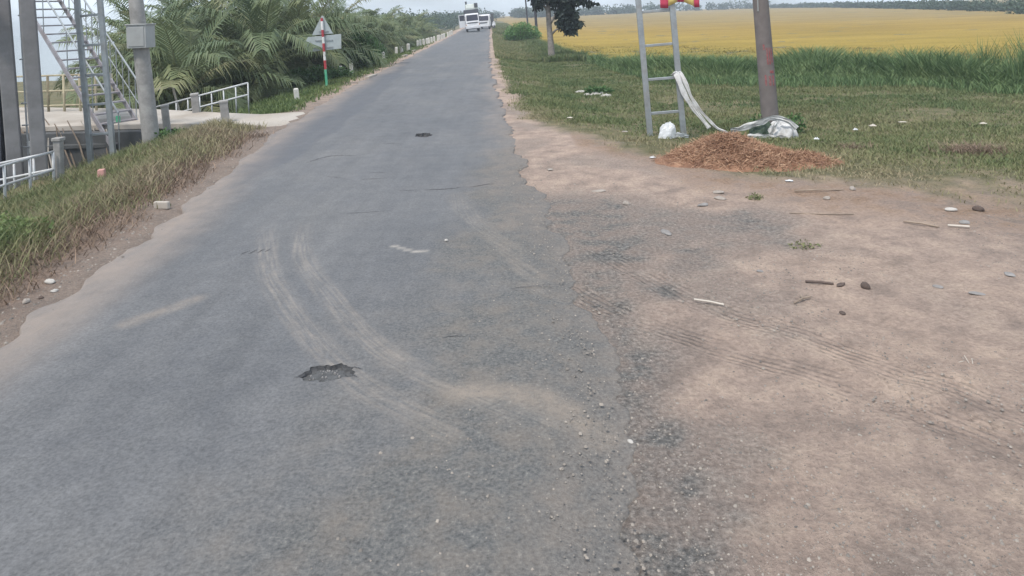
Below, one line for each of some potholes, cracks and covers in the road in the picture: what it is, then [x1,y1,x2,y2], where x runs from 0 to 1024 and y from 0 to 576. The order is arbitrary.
pothole [296,363,359,382]
